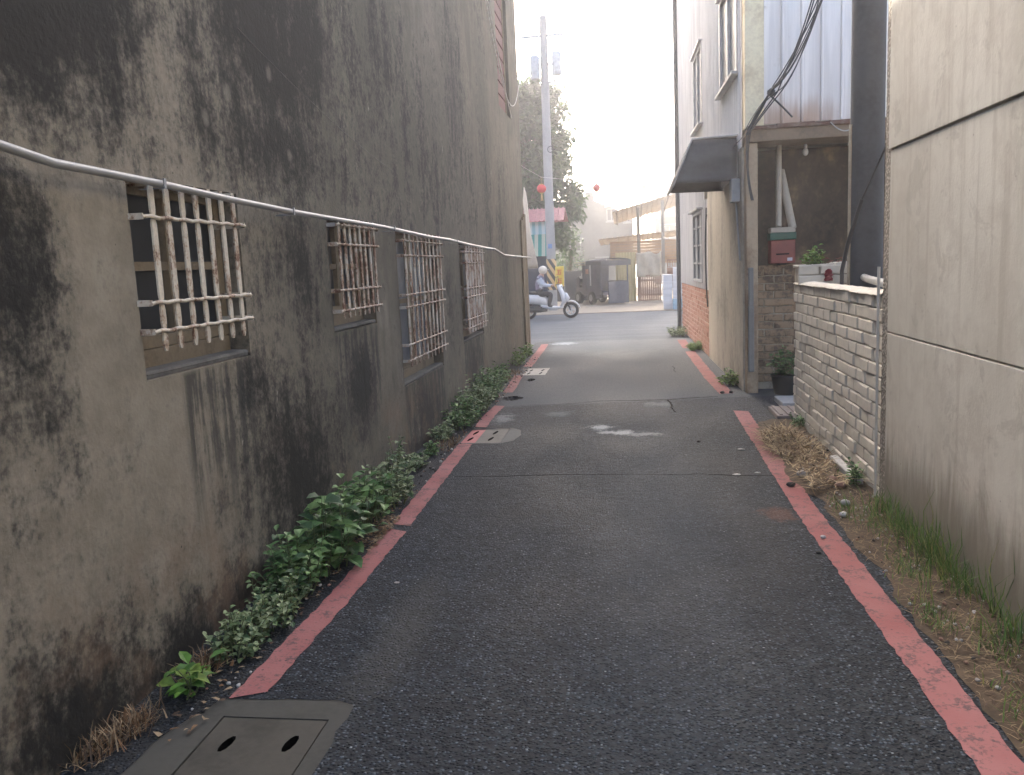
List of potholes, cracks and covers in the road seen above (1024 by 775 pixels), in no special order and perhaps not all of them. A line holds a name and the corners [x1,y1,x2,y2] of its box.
crack [553,396,718,412]
